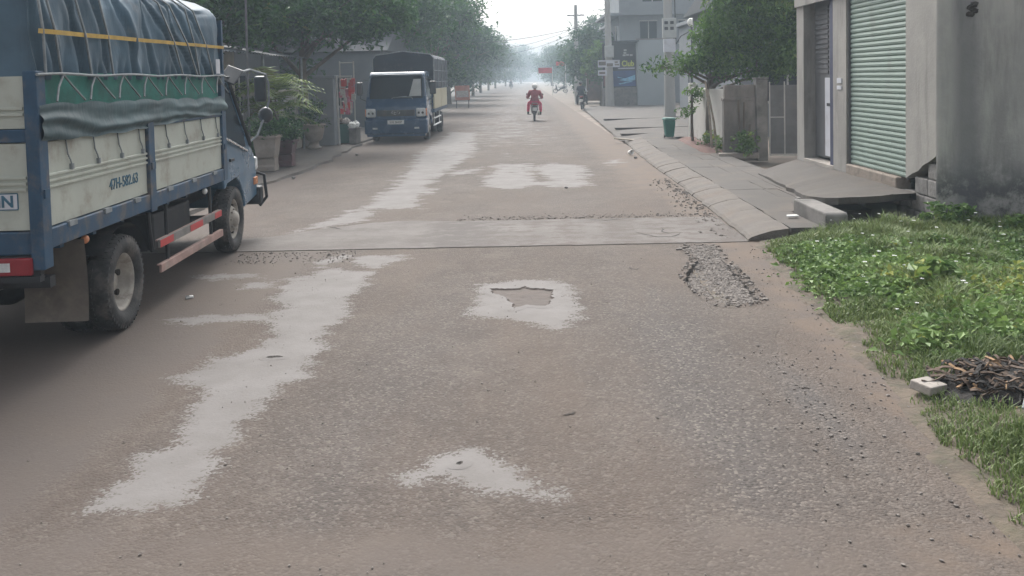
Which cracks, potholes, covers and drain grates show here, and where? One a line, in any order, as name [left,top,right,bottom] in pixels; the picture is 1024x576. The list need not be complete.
pothole [483,284,564,311]
pothole [675,243,769,308]
